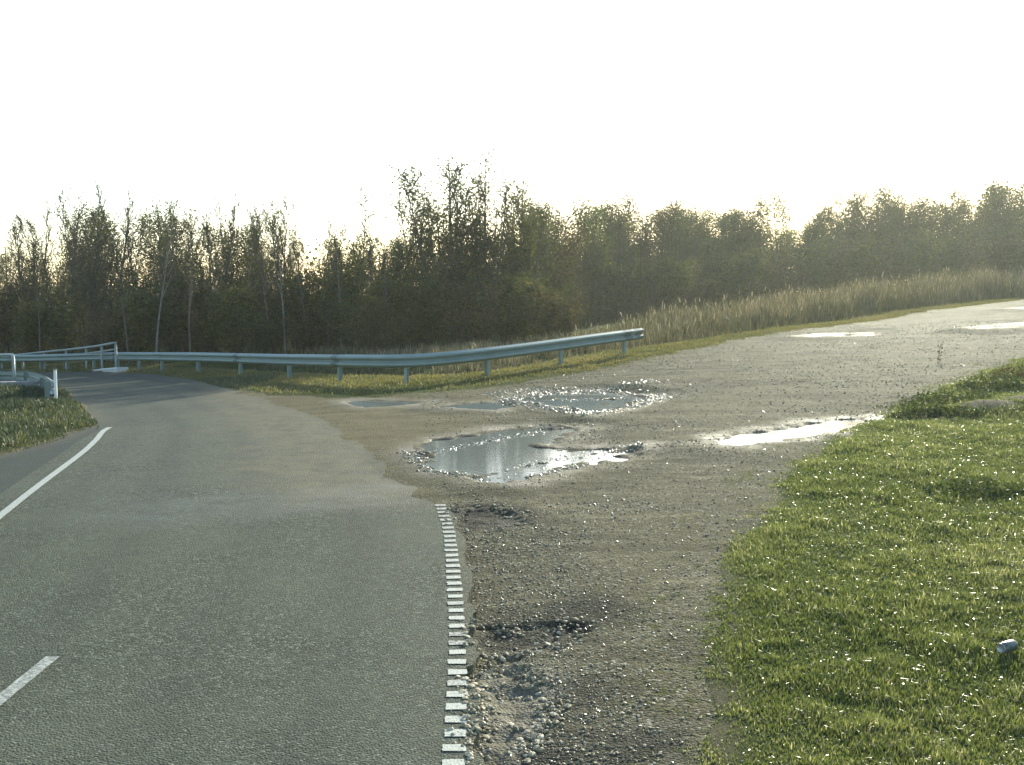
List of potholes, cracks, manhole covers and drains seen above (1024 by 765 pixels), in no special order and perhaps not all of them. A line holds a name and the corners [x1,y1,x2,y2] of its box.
pothole [452,616,588,663]
pothole [441,504,537,532]
pothole [447,662,577,765]
pothole [396,425,644,483]
pothole [470,378,686,416]
